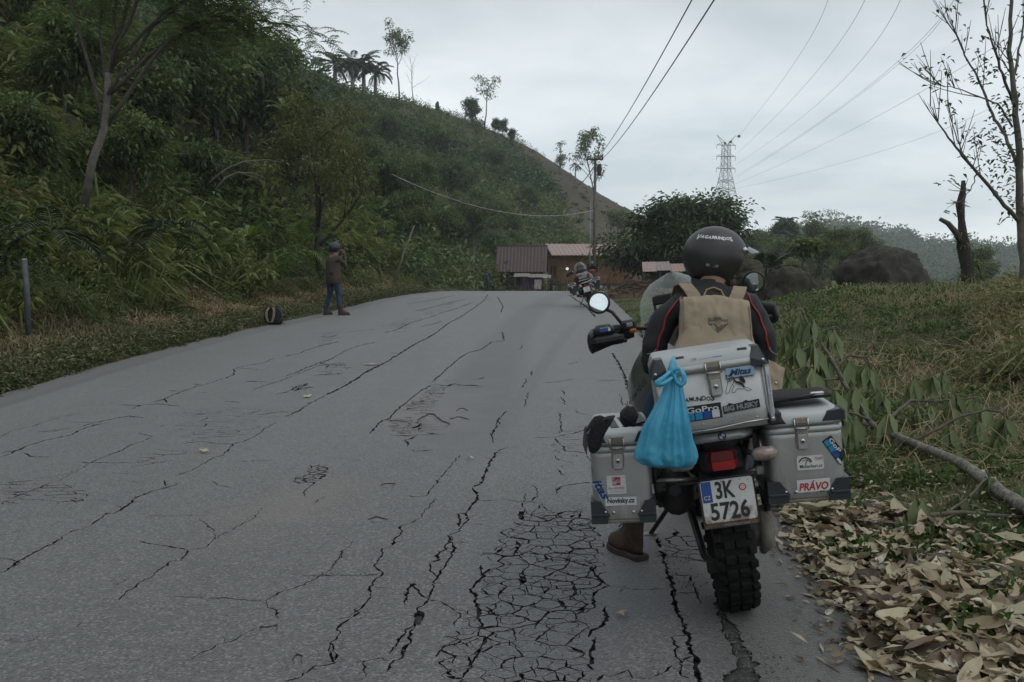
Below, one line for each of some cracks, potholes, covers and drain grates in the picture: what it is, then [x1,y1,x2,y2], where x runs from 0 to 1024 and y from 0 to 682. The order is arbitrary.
crack [0,295,504,600]
crack [178,362,706,682]
